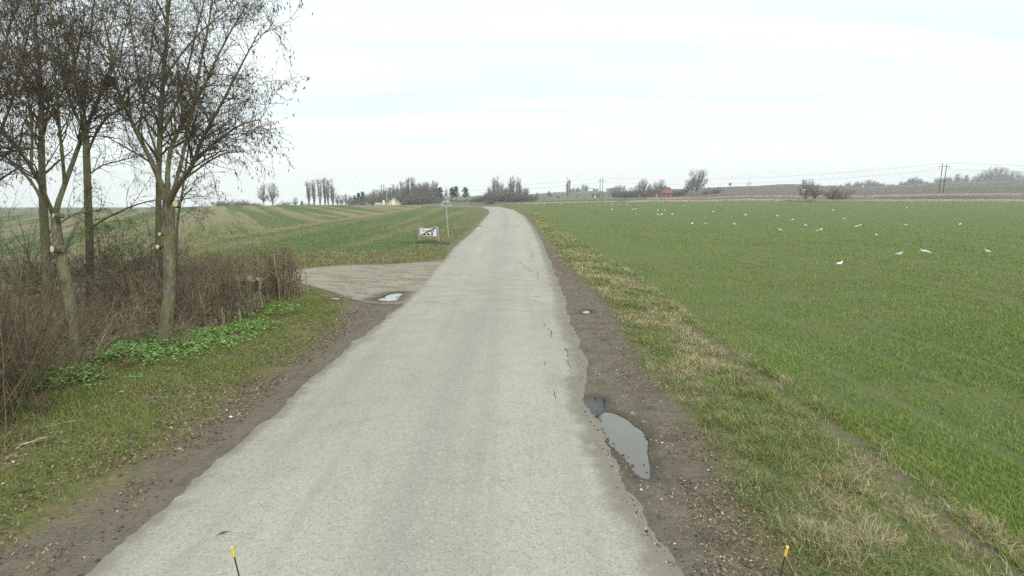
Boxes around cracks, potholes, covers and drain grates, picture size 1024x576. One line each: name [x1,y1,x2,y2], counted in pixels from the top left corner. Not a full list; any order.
crack [434,254,572,369]
pothole [583,397,606,417]
pothole [375,292,403,301]
pothole [595,411,651,479]
